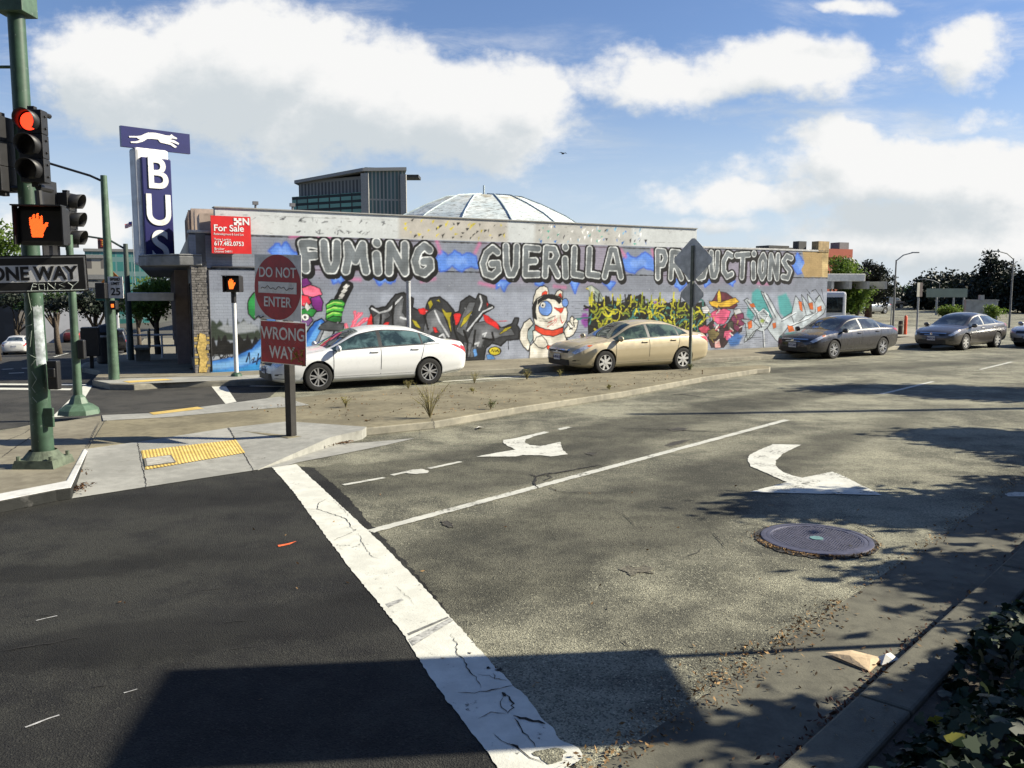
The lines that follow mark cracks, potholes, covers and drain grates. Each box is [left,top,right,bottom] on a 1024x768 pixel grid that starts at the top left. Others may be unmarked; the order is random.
manhole cover [754,523,880,559]
crack [531,464,603,493]
crack [454,640,545,763]
